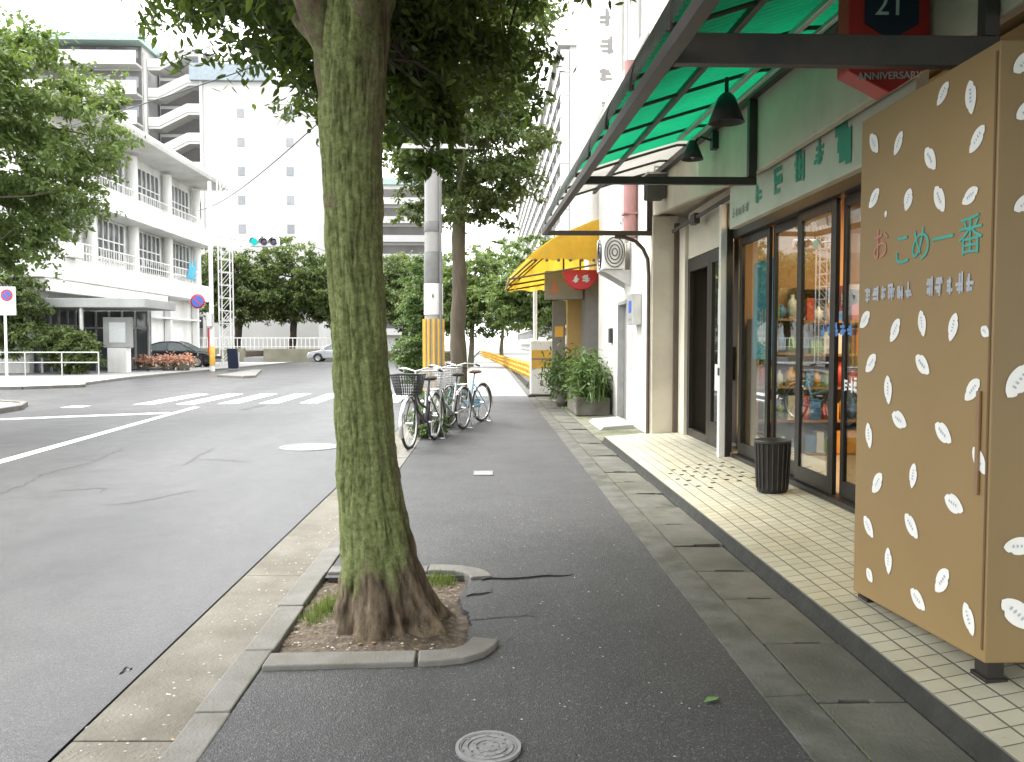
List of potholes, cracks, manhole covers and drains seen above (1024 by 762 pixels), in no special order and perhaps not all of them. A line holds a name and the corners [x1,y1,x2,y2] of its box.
manhole cover [455,730,521,762]
crack [2,448,194,505]
manhole cover [279,443,336,451]
crack [466,566,573,596]
crack [183,448,244,466]
